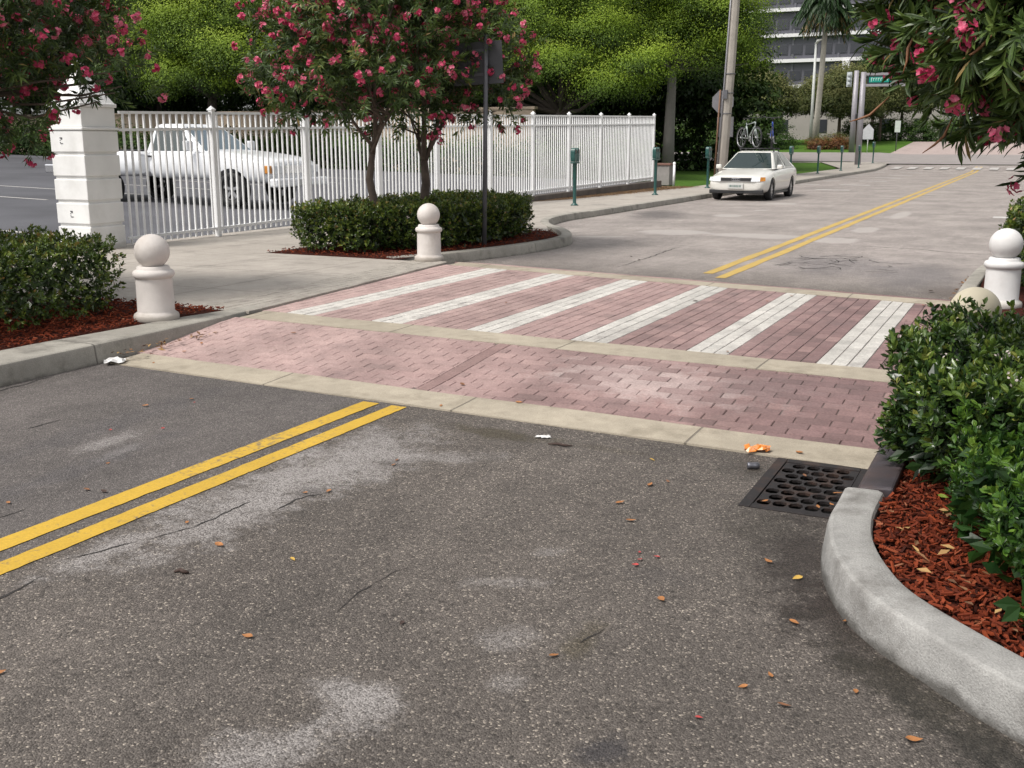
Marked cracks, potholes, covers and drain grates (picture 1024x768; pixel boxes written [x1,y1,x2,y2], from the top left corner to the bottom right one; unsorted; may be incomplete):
drain grate [738,445,912,519]
crack [337,568,406,612]
